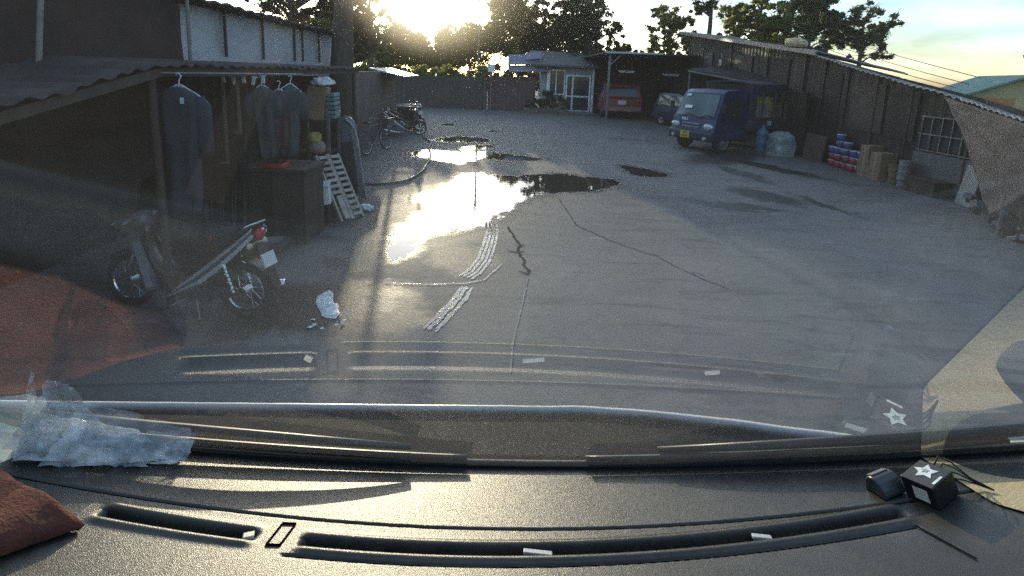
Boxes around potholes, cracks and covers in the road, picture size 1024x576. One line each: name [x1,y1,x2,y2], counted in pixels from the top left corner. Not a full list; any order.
crack [507,226,531,275]
crack [558,198,726,288]
